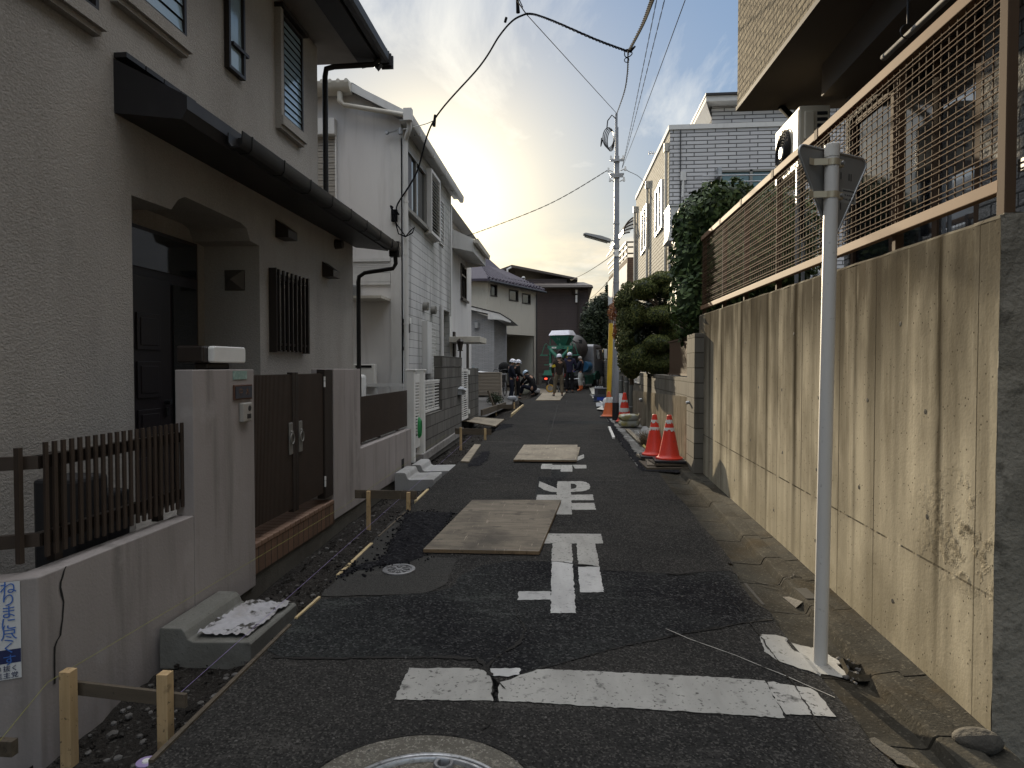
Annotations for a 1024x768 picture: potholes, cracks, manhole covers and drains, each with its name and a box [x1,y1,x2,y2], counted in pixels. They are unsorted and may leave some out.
crack [316,602,528,768]
pothole [836,656,871,685]
manhole cover [321,735,523,768]
